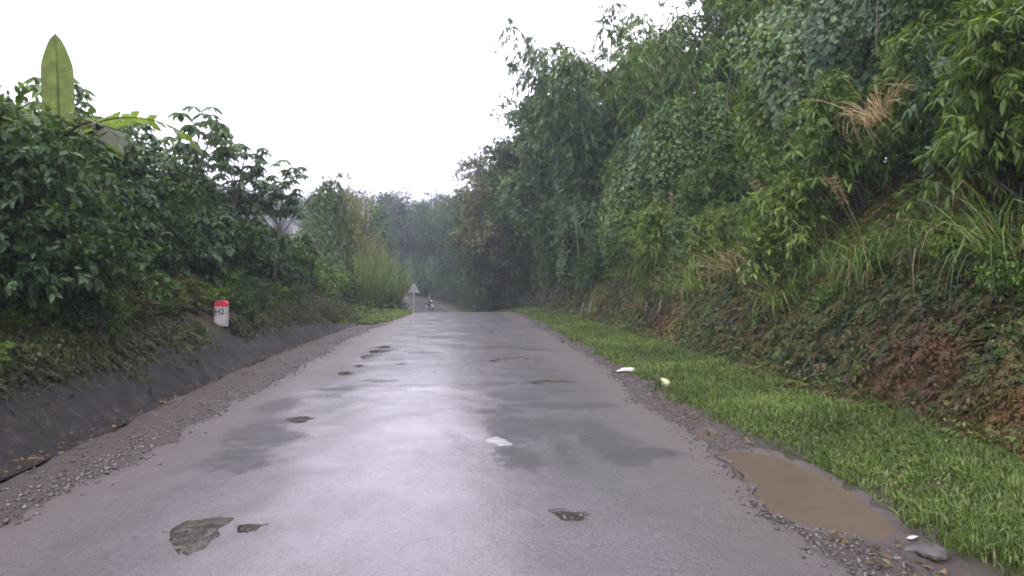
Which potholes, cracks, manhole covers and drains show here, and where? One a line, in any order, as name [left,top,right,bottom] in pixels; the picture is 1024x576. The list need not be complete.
pothole [163,512,236,556]
pothole [235,523,268,533]
pothole [714,448,915,545]
pothole [548,508,590,522]
